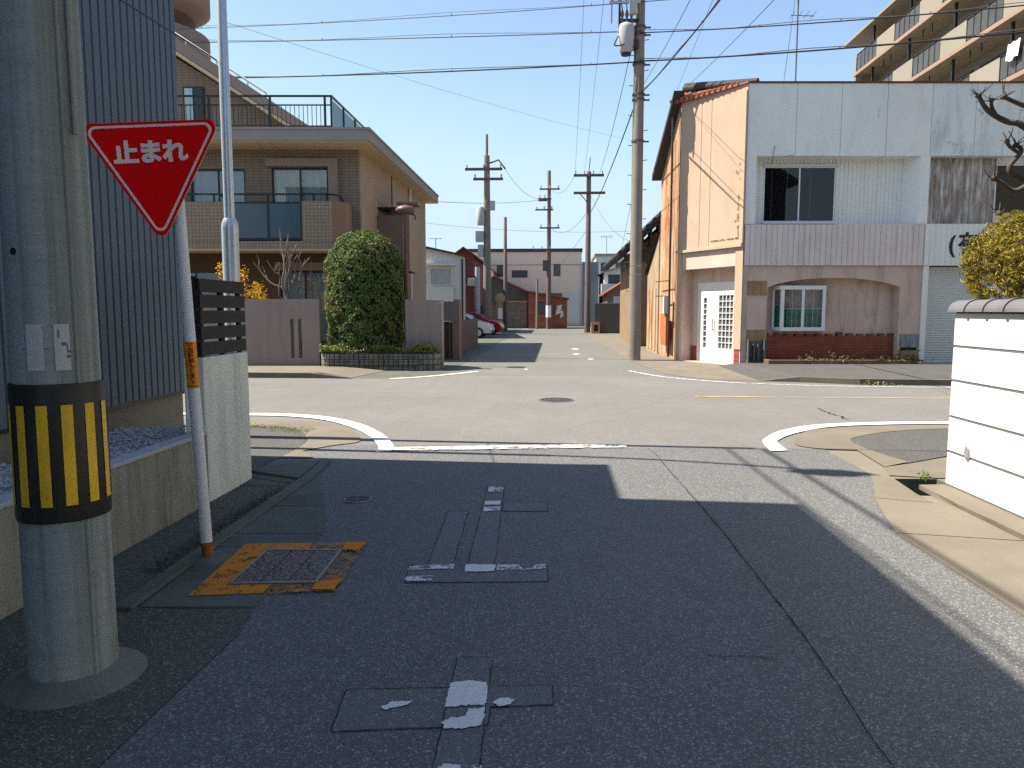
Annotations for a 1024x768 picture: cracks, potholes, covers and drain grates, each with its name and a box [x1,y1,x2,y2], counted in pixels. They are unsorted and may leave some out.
manhole cover [344,495,372,504]
